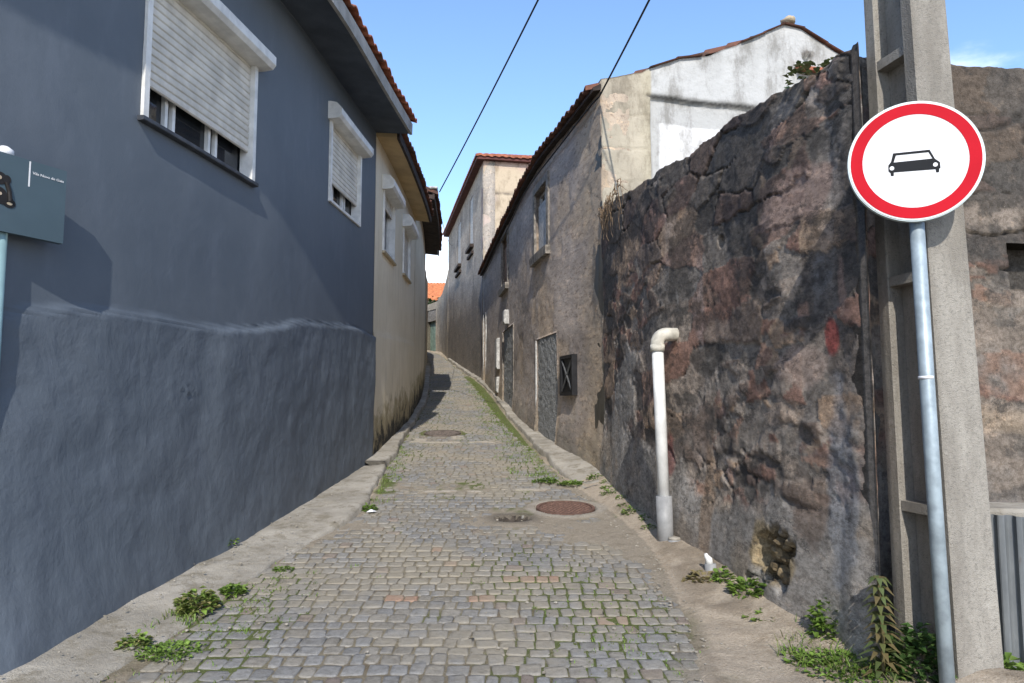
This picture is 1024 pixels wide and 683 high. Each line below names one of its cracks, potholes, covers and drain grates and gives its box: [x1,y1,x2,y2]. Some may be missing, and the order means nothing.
manhole cover [536,501,595,515]
